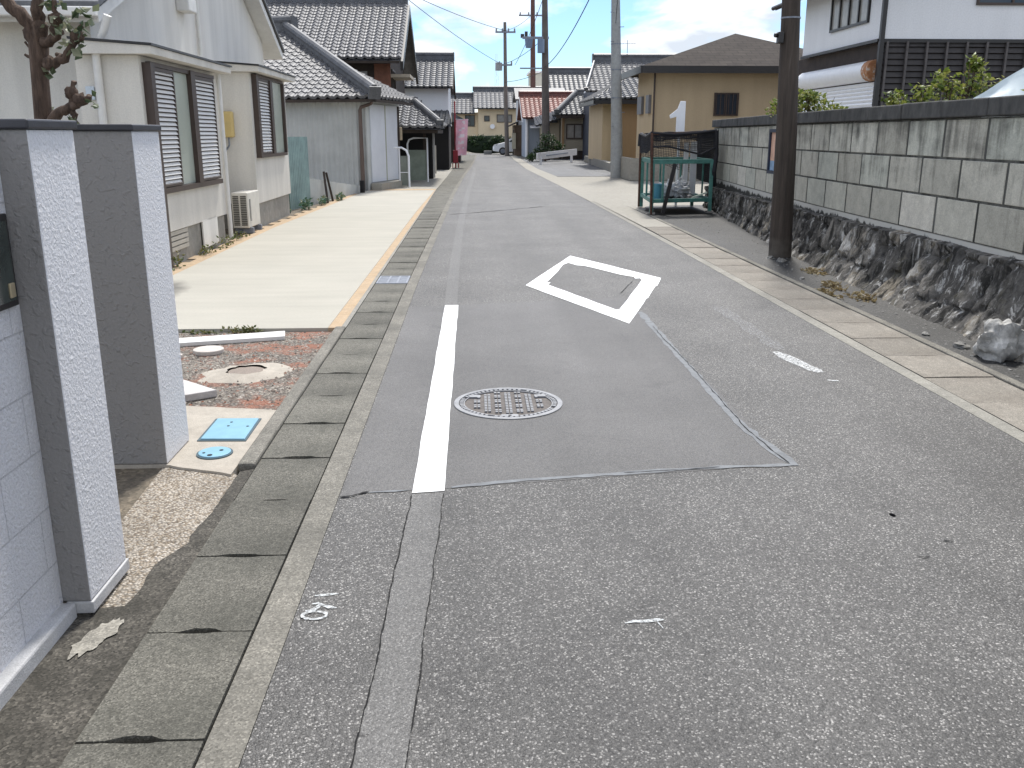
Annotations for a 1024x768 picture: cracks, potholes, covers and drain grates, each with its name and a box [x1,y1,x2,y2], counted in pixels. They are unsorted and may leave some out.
manhole cover [454,388,563,420]
drain grate [376,276,411,284]
